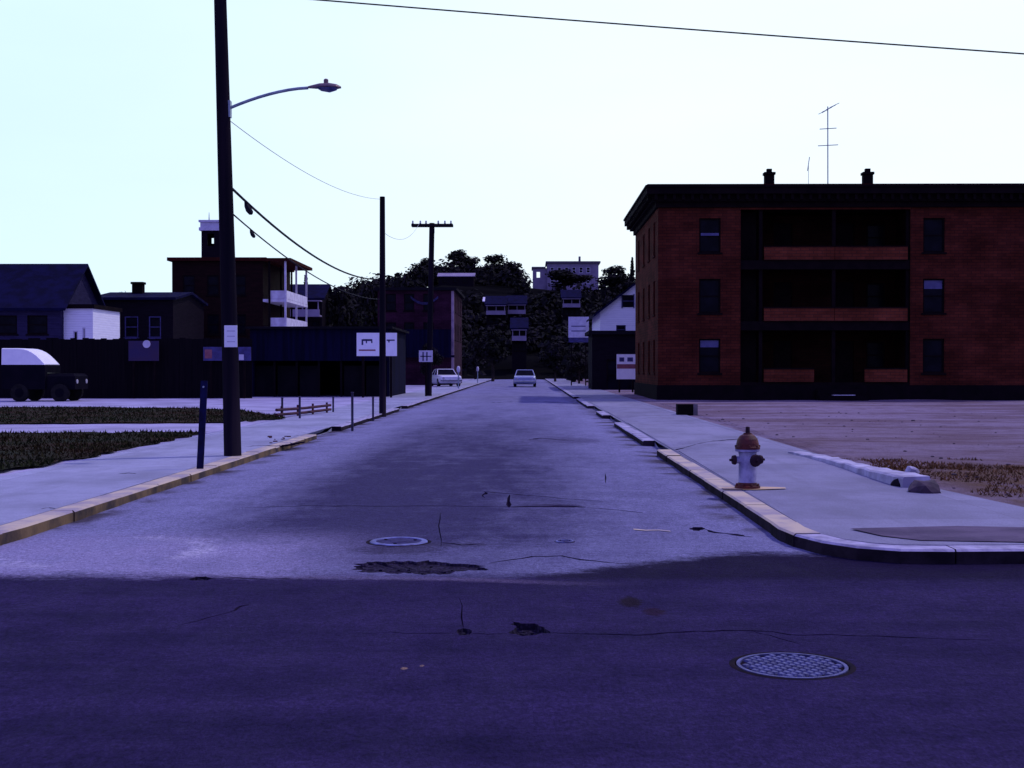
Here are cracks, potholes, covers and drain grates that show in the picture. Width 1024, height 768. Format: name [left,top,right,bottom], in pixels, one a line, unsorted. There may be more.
crack [181,604,249,625]
crack [258,491,641,513]
pothole [352,560,488,575]
manhole cover [366,537,431,547]
crack [550,630,970,644]
crack [705,529,749,537]
manhole cover [729,652,856,680]
crack [492,556,628,564]
pothole [509,622,550,636]
